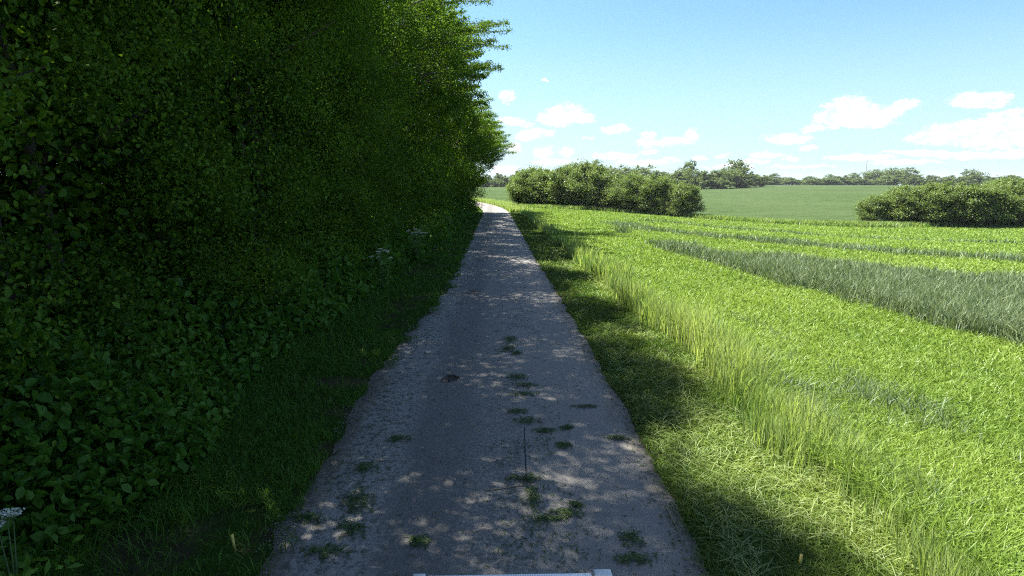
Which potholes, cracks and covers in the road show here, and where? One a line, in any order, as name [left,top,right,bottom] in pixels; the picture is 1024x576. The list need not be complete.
pothole [440,374,460,383]
